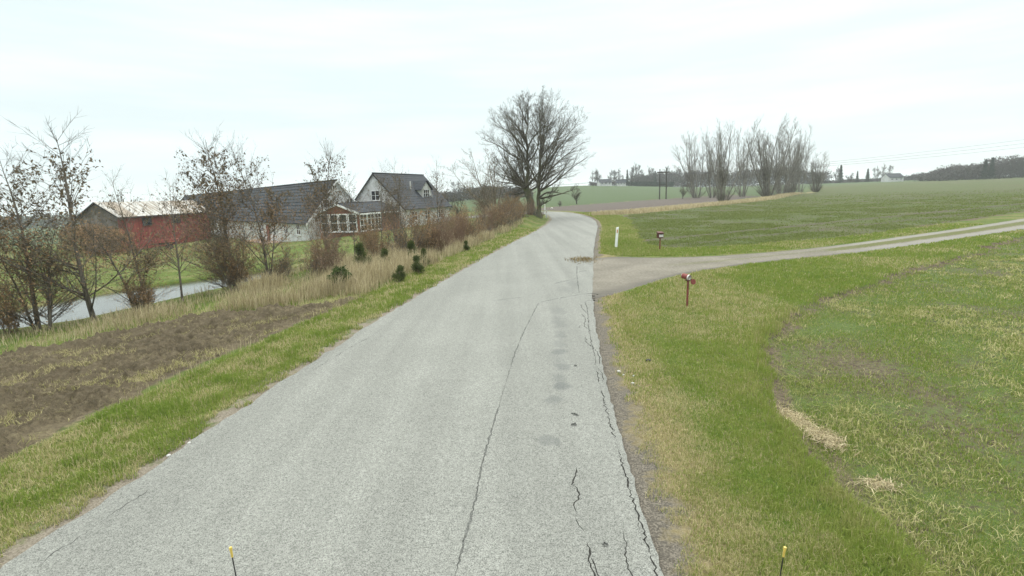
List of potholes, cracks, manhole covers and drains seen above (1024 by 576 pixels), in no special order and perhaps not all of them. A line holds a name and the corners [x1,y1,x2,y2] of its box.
crack [43,489,149,563]
crack [571,468,599,576]
crack [579,293,658,576]
